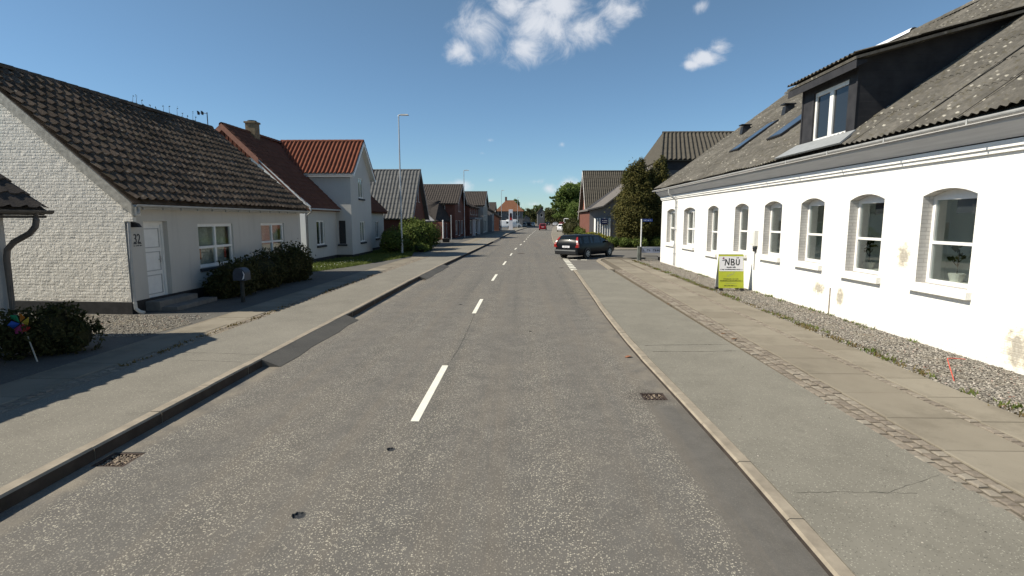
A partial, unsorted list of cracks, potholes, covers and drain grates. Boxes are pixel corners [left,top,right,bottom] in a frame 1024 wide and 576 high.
crack [797,475,939,494]
drain grate [91,453,145,467]
